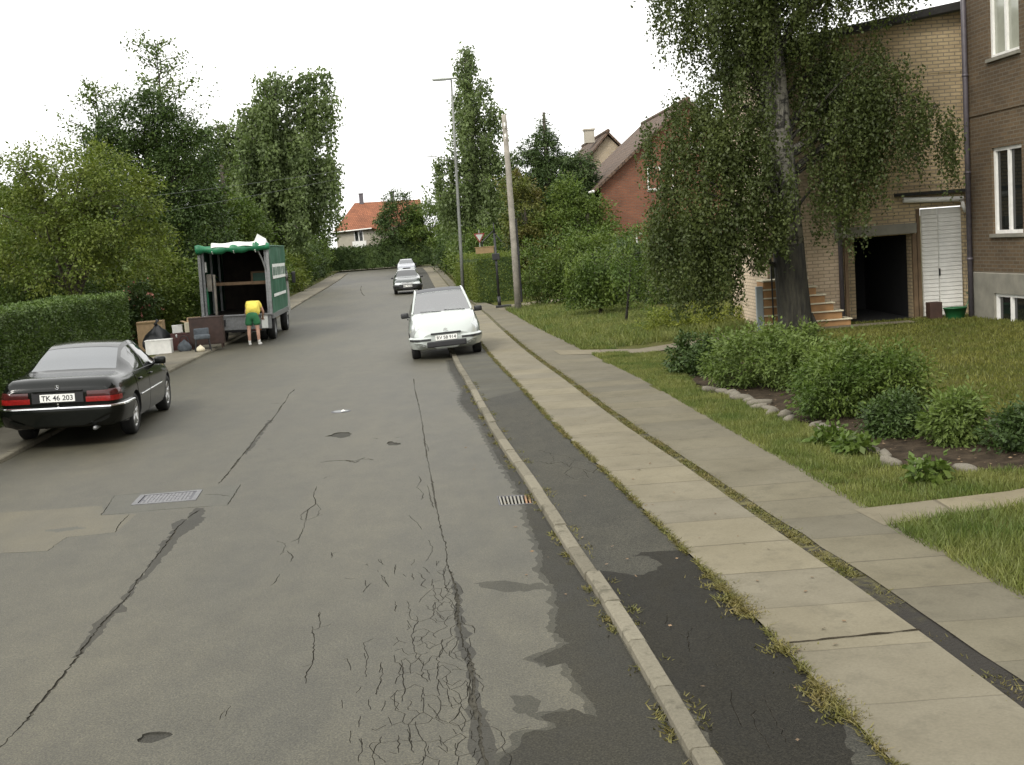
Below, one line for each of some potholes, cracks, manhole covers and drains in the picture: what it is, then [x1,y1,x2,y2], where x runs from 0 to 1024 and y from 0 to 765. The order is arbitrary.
pothole [137,732,173,743]
drain grate [497,494,533,506]
crack [303,612,328,682]
crack [0,390,294,747]
crack [273,458,372,584]
crack [341,379,532,765]
